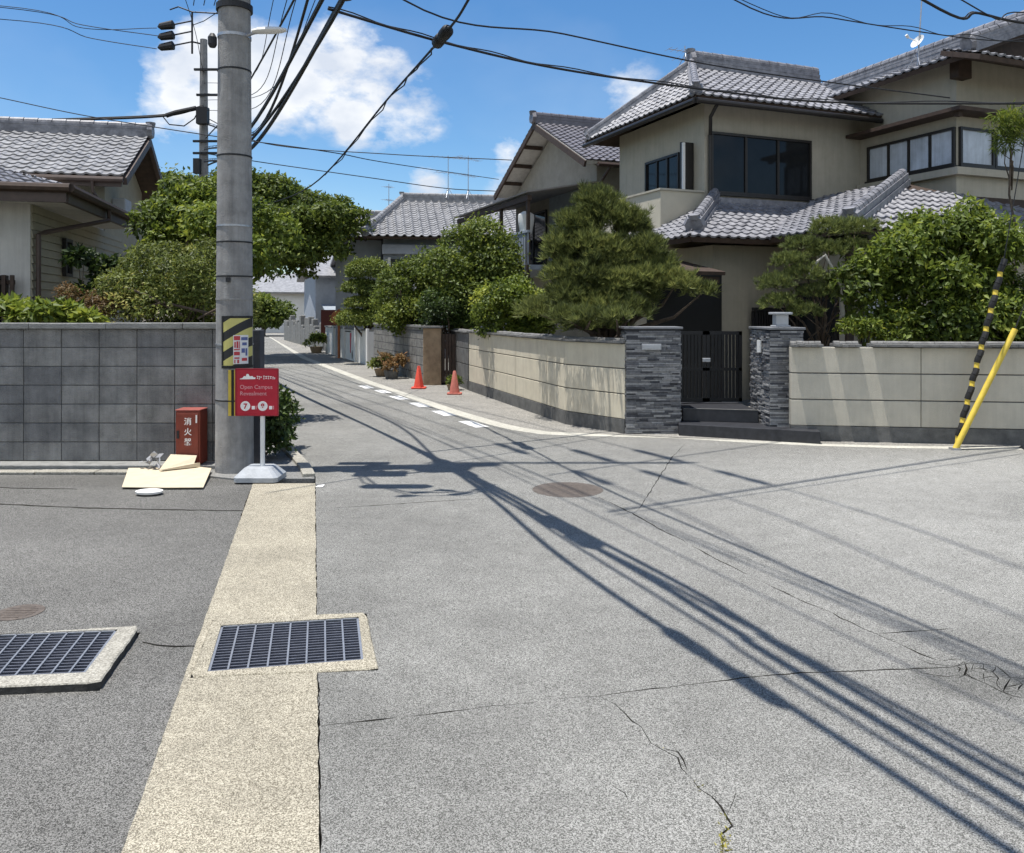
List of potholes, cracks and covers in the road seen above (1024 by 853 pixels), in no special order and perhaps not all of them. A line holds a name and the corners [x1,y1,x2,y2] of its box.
manhole cover [0,604,45,621]
drain grate [0,626,137,695]
manhole cover [533,482,603,497]
drain grate [192,613,378,683]
crack [322,447,1024,843]
